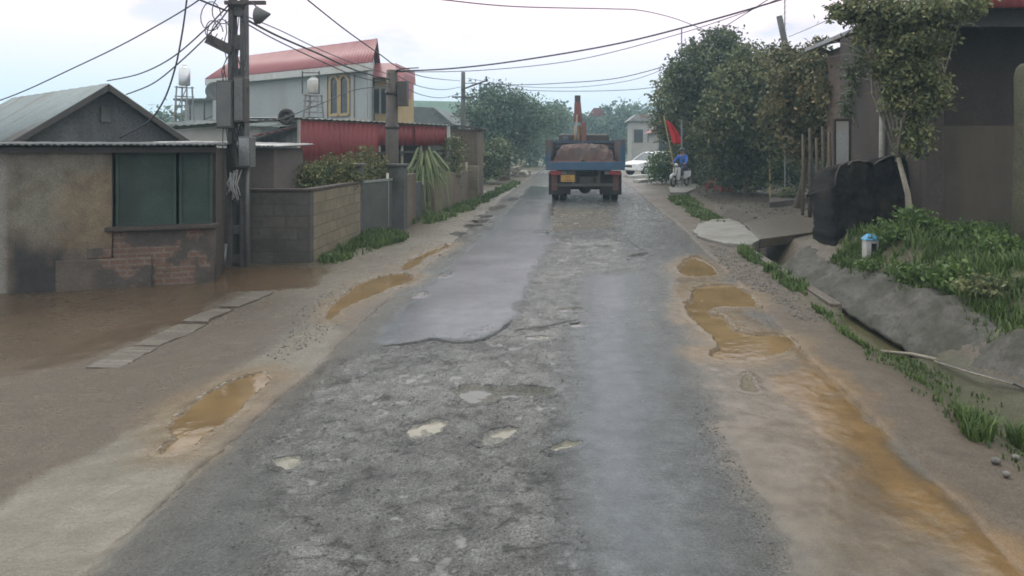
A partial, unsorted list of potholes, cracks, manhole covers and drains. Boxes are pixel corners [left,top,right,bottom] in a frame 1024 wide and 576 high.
pothole [541,437,591,455]
pothole [445,381,561,406]
pothole [671,256,725,278]
pothole [147,370,279,459]
pothole [733,371,766,395]
pothole [316,272,420,322]
pothole [398,416,457,444]
pothole [677,283,803,363]
pothole [472,423,528,449]
pothole [264,451,312,473]
